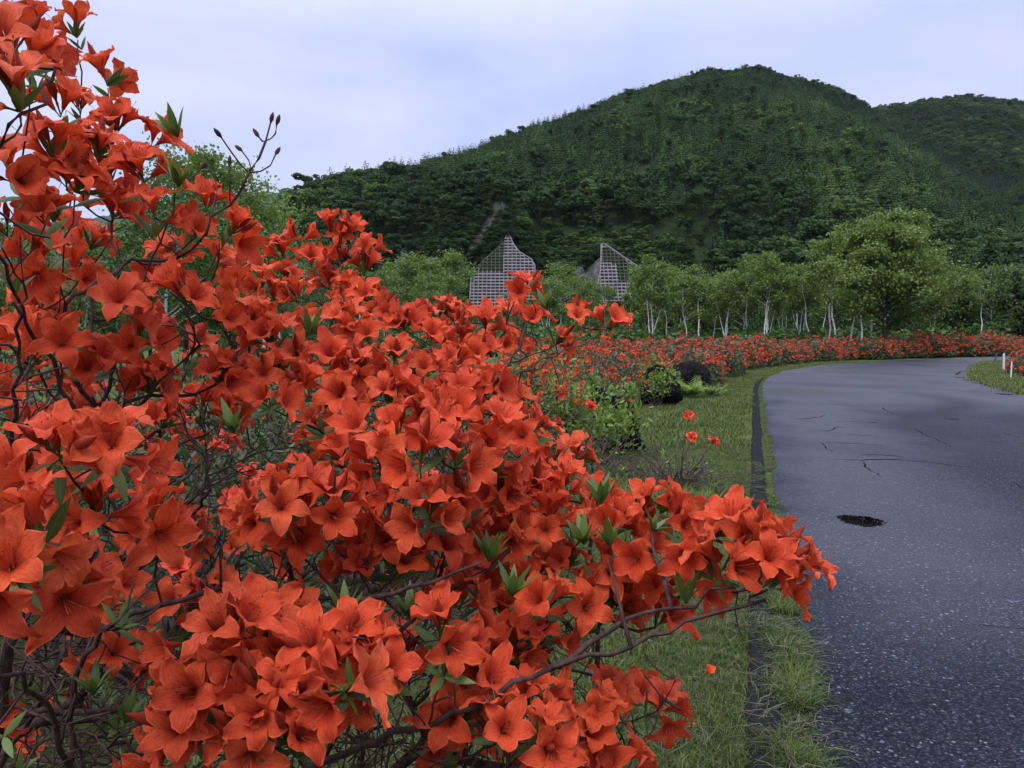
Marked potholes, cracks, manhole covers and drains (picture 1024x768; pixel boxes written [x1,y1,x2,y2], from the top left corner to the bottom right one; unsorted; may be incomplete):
pothole [833,514,890,529]
crack [804,404,966,475]
